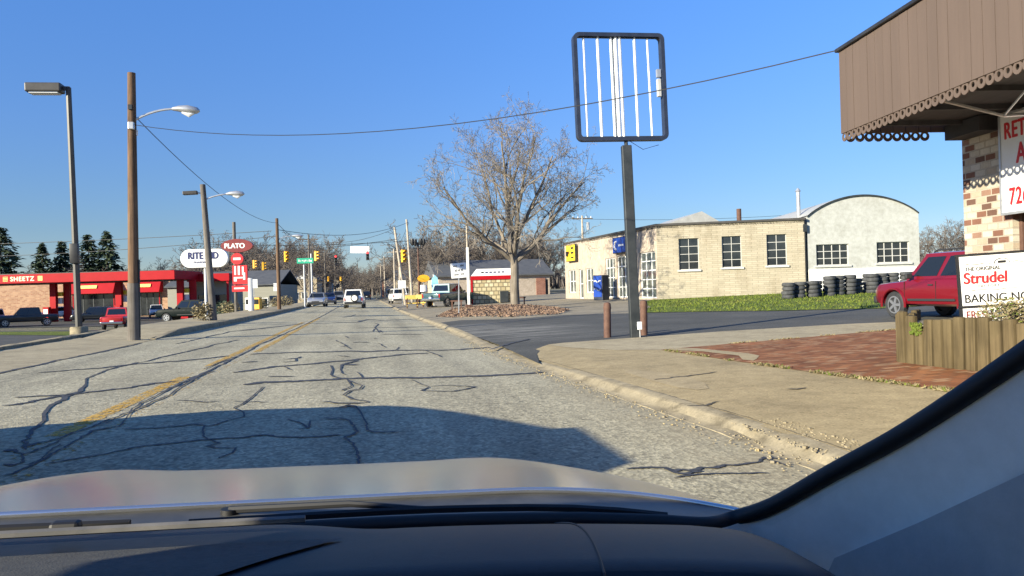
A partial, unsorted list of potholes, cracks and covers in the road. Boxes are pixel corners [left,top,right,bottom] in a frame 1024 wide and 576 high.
crack [38,324,298,373]
crack [326,310,432,349]
crack [413,380,476,391]
